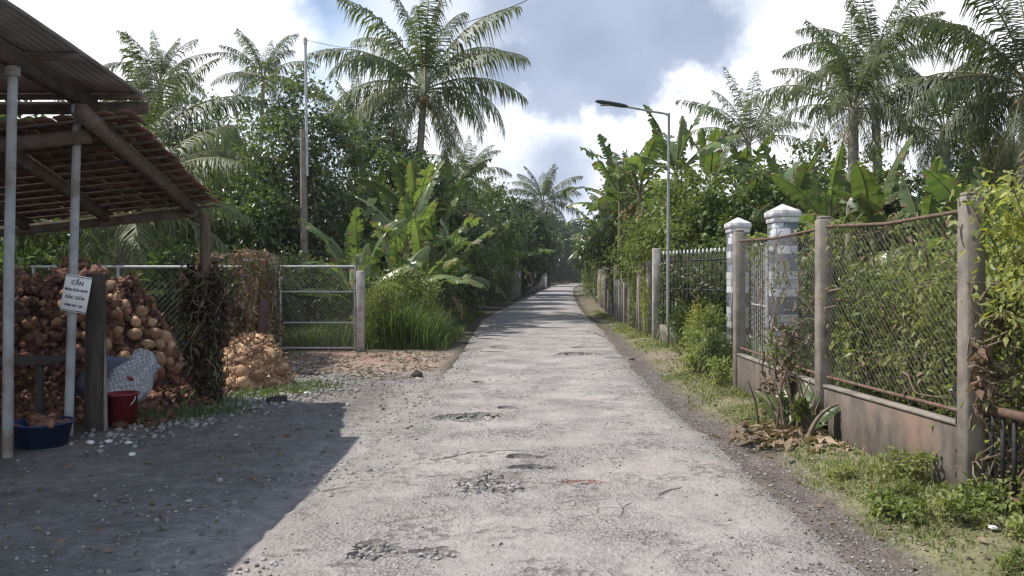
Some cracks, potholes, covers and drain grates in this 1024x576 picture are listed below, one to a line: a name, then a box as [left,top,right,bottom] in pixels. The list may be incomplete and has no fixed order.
pothole [430,412,508,422]
crack [554,487,682,521]
pothole [451,469,539,496]
crack [424,450,535,478]
pothole [408,546,460,561]
pothole [345,538,408,562]
